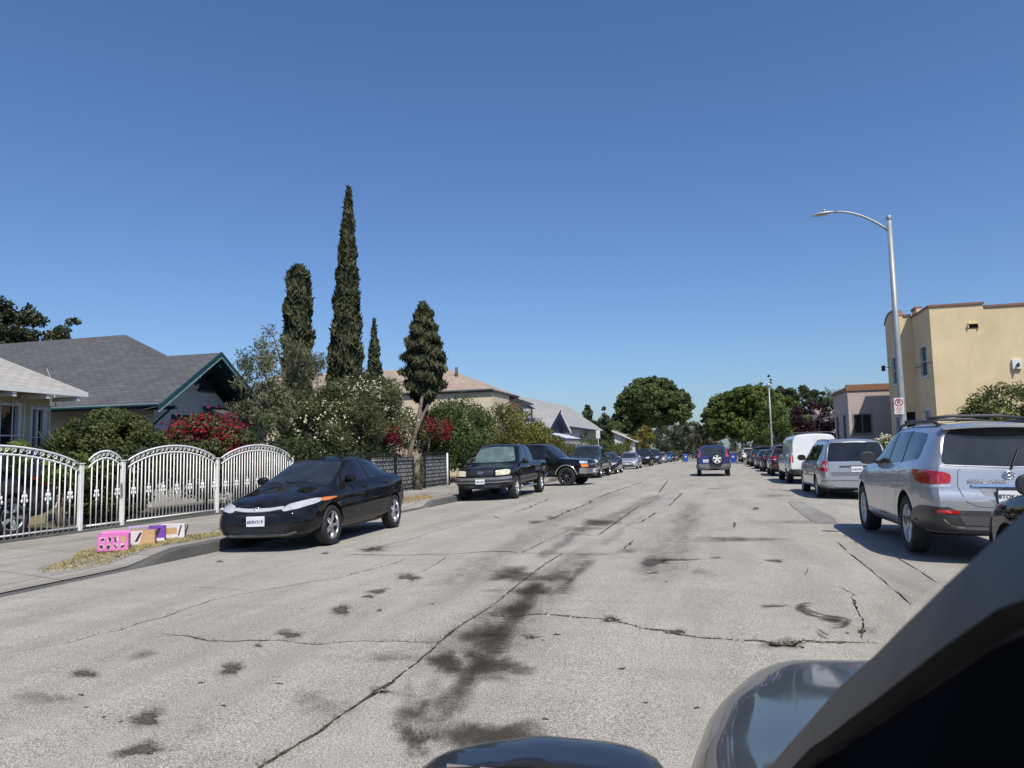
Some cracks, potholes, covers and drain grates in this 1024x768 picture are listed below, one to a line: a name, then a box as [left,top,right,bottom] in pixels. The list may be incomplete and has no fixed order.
crack [1,525,593,655]
crack [473,569,885,647]
